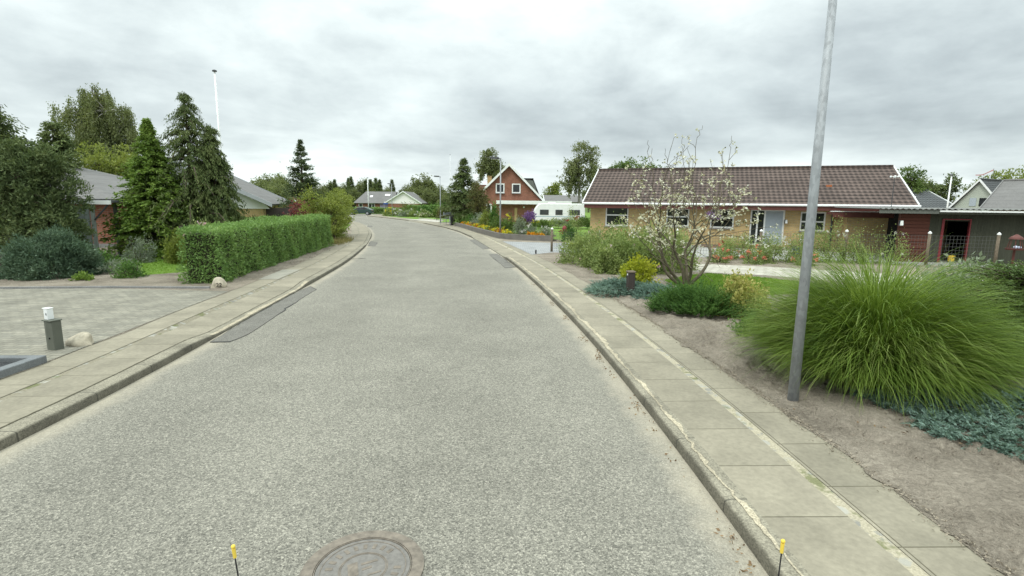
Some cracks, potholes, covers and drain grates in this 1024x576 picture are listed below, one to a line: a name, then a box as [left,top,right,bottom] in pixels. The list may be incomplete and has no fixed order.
manhole cover [299,530,424,576]
